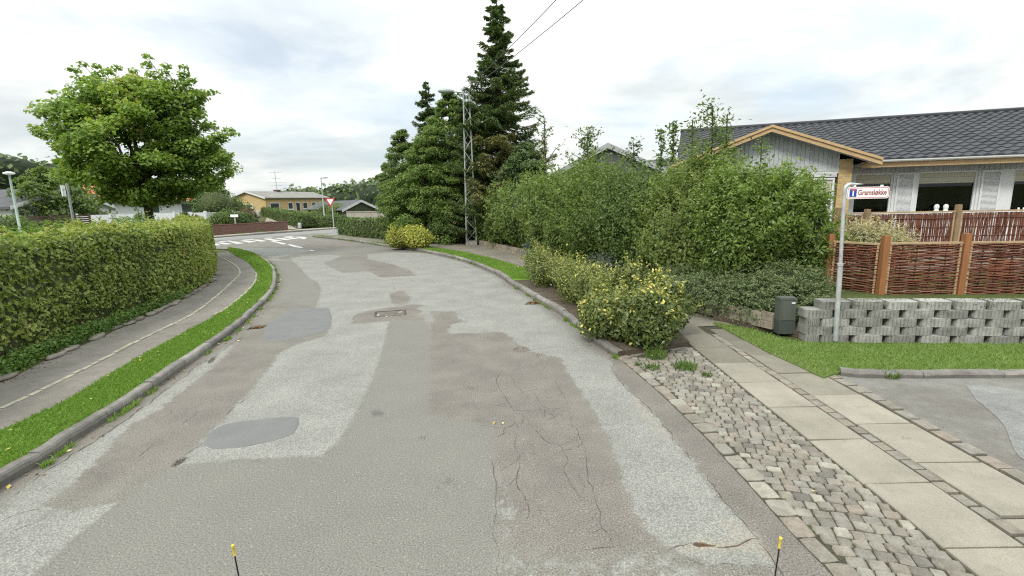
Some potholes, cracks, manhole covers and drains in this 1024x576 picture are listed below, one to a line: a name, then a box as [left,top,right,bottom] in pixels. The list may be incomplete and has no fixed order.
crack [484,370,612,541]
manhole cover [374,309,407,317]
